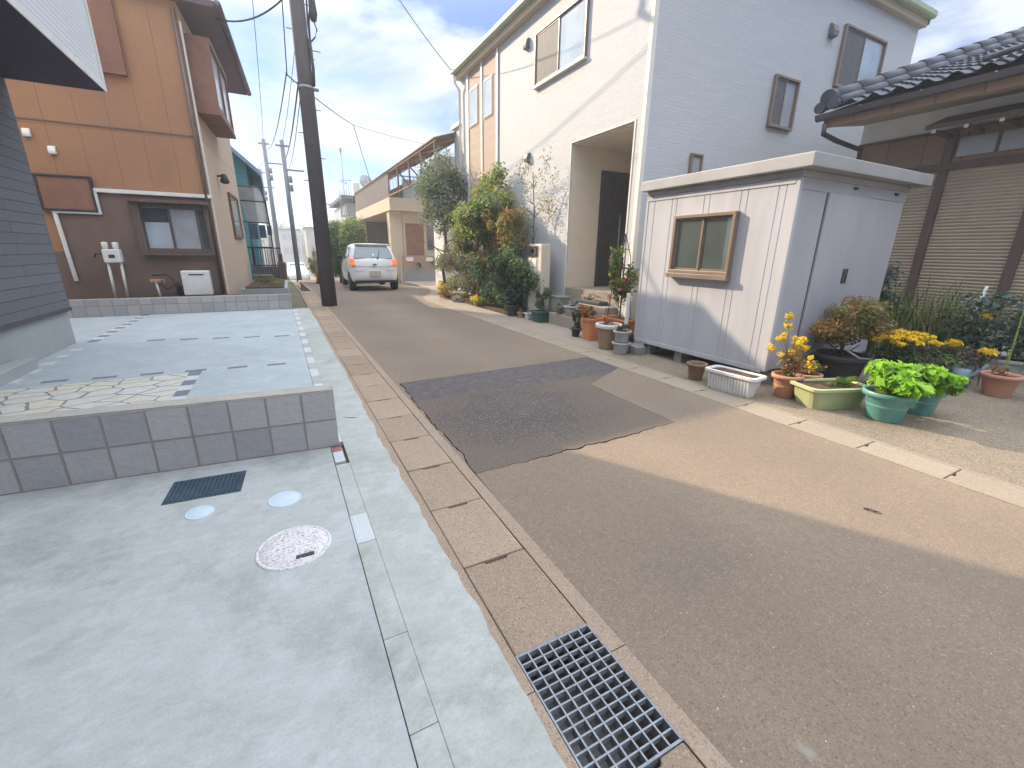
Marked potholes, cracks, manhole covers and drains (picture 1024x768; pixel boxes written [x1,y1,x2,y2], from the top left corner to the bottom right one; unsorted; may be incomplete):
drain grate [515,623,683,768]
manhole cover [255,525,331,571]
